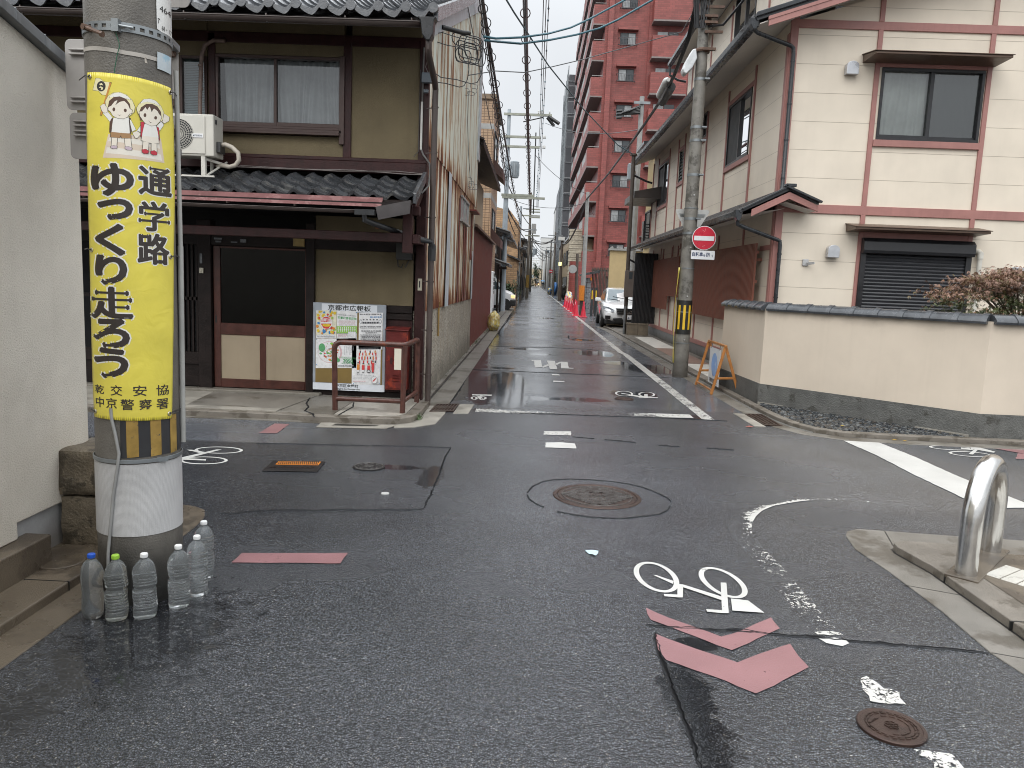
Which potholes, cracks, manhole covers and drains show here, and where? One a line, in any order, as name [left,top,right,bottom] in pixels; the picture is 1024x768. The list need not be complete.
drain grate [429,403,459,412]
crack [646,624,989,654]
drain grate [745,414,783,426]
manhole cover [353,462,385,471]
manhole cover [856,708,928,748]
manhole cover [553,484,641,509]
